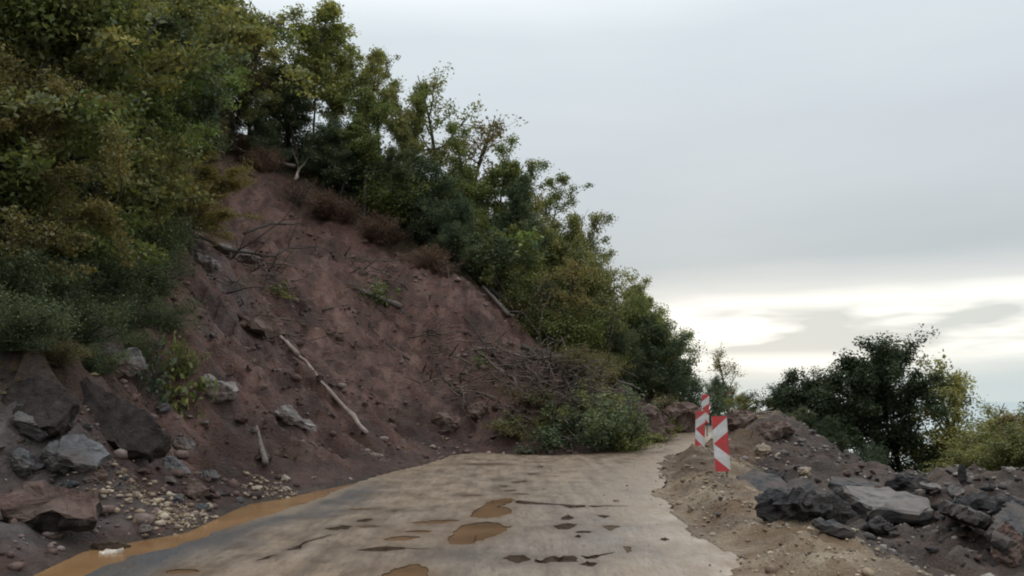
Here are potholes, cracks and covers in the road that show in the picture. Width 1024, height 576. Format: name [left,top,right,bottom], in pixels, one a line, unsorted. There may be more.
pothole [503,555,531,563]
pothole [381,564,429,576]
pothole [447,521,512,545]
crack [515,500,611,508]
pothole [470,498,515,519]
